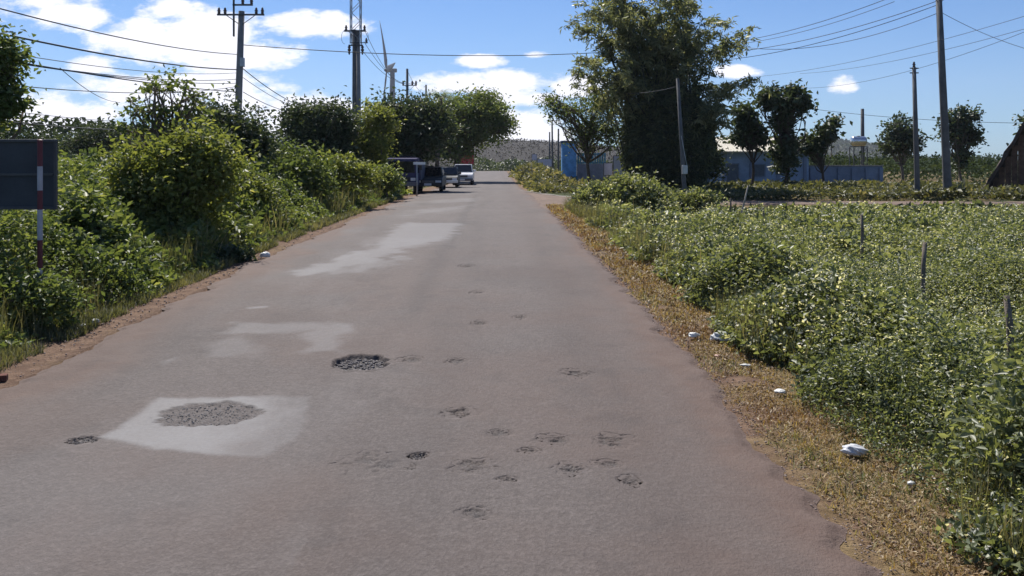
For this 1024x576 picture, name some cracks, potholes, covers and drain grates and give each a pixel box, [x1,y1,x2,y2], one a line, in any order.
pothole [405,452,429,461]
pothole [141,398,277,429]
pothole [63,435,102,446]
pothole [325,353,398,373]
